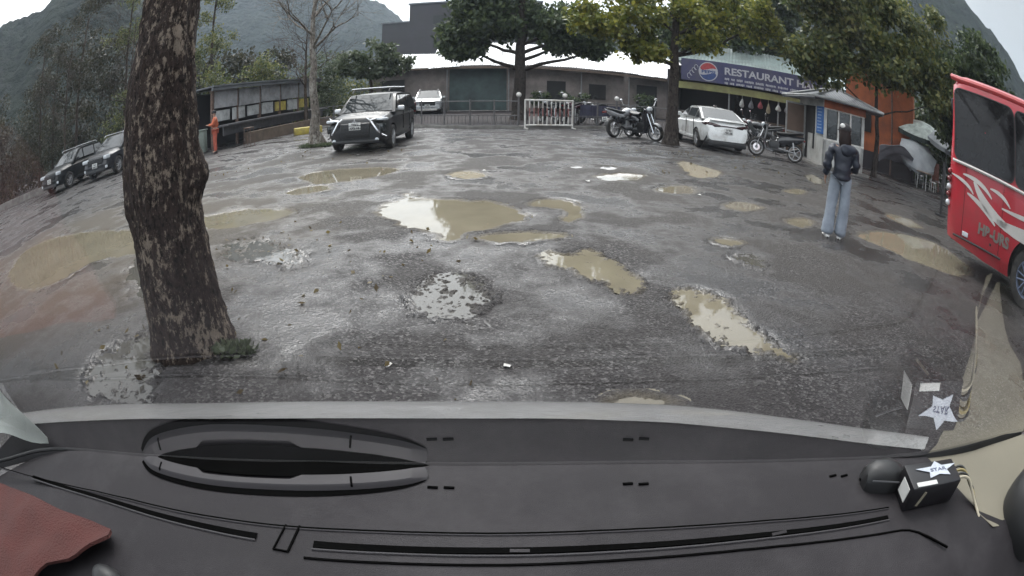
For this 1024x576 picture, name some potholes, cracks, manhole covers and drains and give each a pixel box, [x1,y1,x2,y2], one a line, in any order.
pothole [673,161,724,178]
pothole [217,236,312,271]
pothole [369,193,533,243]
pothole [529,247,651,296]
pothole [523,198,588,224]
pothole [204,207,298,231]
pothole [5,229,136,293]
pothole [665,285,804,367]
pothole [719,201,767,213]
pothole [395,271,503,325]
pothole [444,170,492,180]
